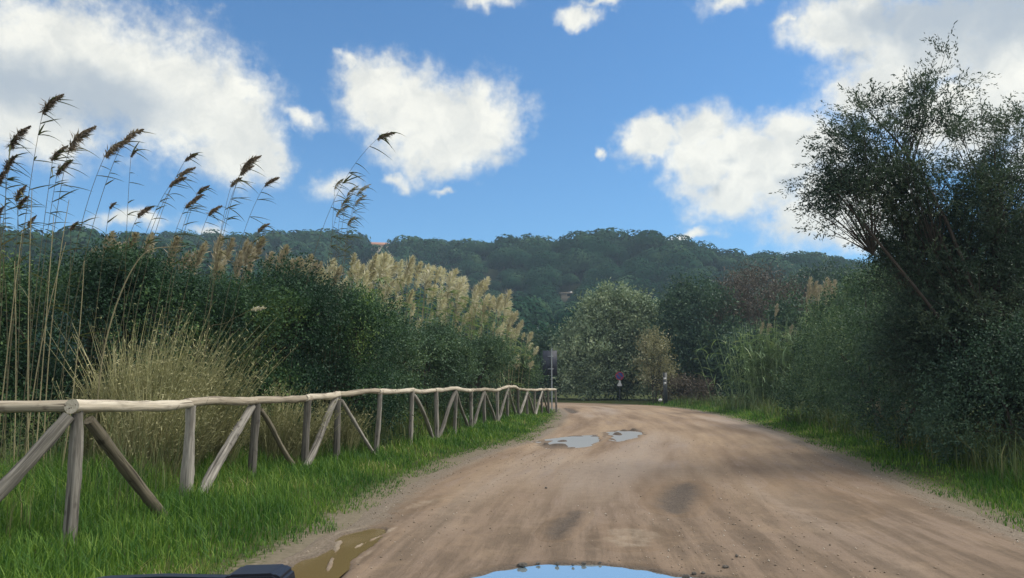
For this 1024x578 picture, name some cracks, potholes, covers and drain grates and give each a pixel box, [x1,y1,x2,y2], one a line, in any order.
pothole [597,428,648,442]
pothole [534,509,595,542]
pothole [275,525,405,578]
pothole [448,560,744,578]
pothole [637,480,717,518]
pothole [524,434,611,450]
